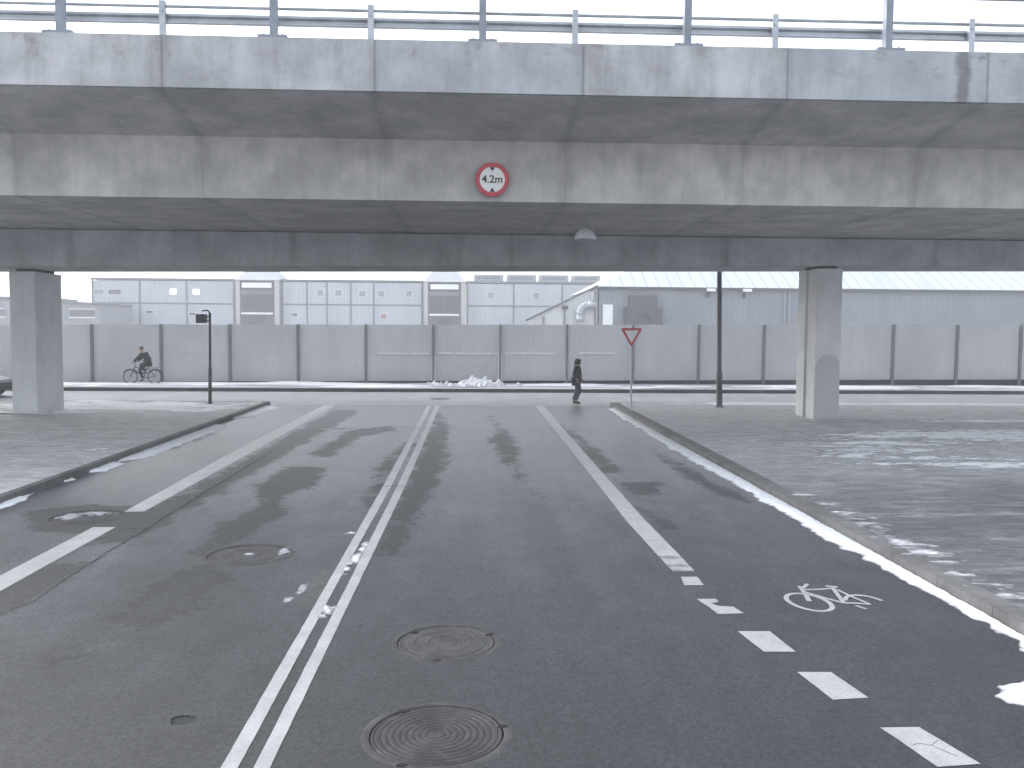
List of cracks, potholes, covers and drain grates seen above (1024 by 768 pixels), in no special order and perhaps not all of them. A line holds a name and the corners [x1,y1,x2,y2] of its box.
manhole cover [202,544,295,566]
manhole cover [44,509,128,526]
manhole cover [391,624,501,663]
pothole [170,715,198,725]
manhole cover [360,702,512,768]
